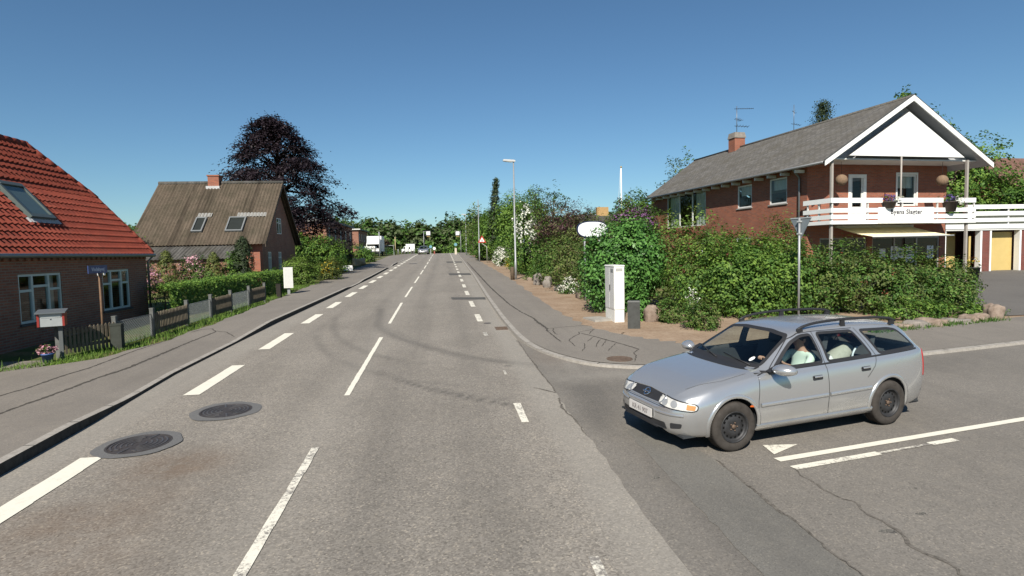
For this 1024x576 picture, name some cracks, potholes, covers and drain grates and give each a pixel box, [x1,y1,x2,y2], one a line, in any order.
crack [467,262,639,360]
crack [717,460,965,576]
manhole cover [189,401,262,421]
manhole cover [90,431,183,459]
